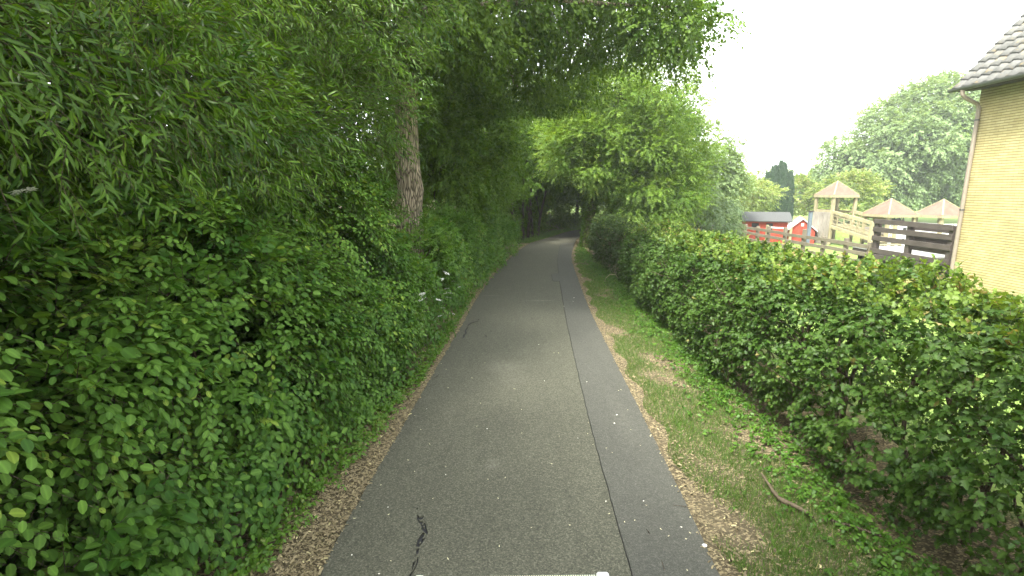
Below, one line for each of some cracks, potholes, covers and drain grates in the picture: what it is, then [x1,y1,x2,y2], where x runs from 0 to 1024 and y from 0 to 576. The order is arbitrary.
crack [409,507,428,576]
